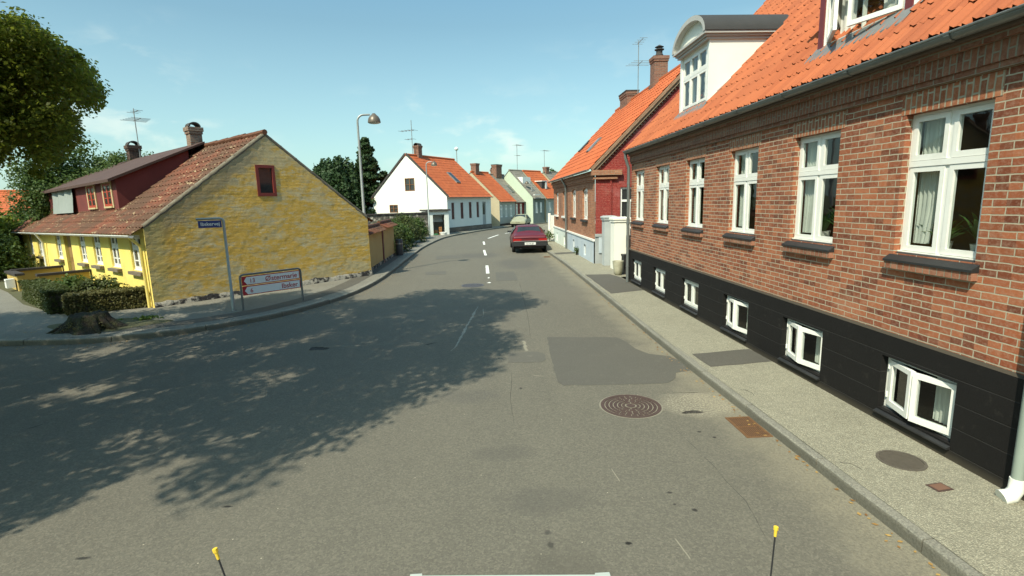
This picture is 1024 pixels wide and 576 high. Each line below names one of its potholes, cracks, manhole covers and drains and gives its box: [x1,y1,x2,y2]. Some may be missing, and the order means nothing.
utility cover [925,482,954,492]
manhole cover [599,394,663,419]
manhole cover [876,450,928,471]
drain grate [725,416,773,438]
